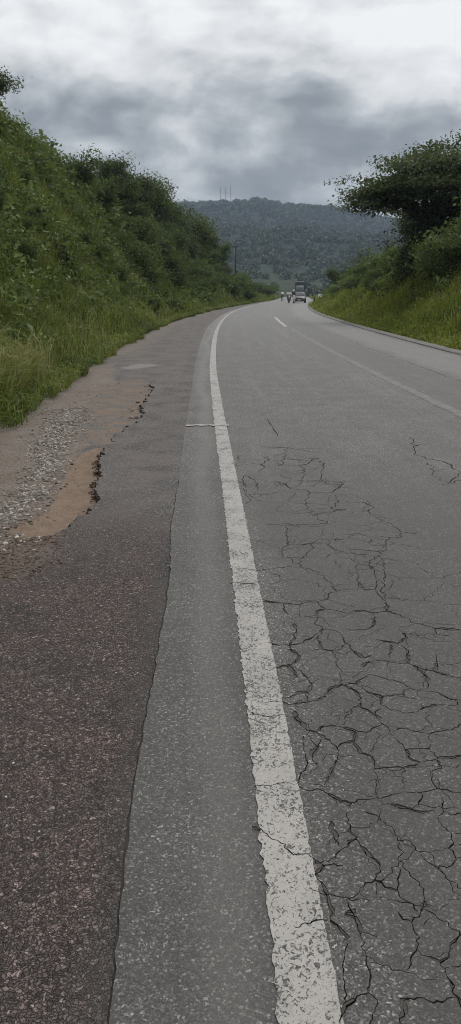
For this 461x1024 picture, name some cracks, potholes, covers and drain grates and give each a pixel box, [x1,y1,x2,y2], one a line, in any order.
crack [243,460,461,1024]
pothole [8,445,108,538]
pothole [78,379,154,445]
